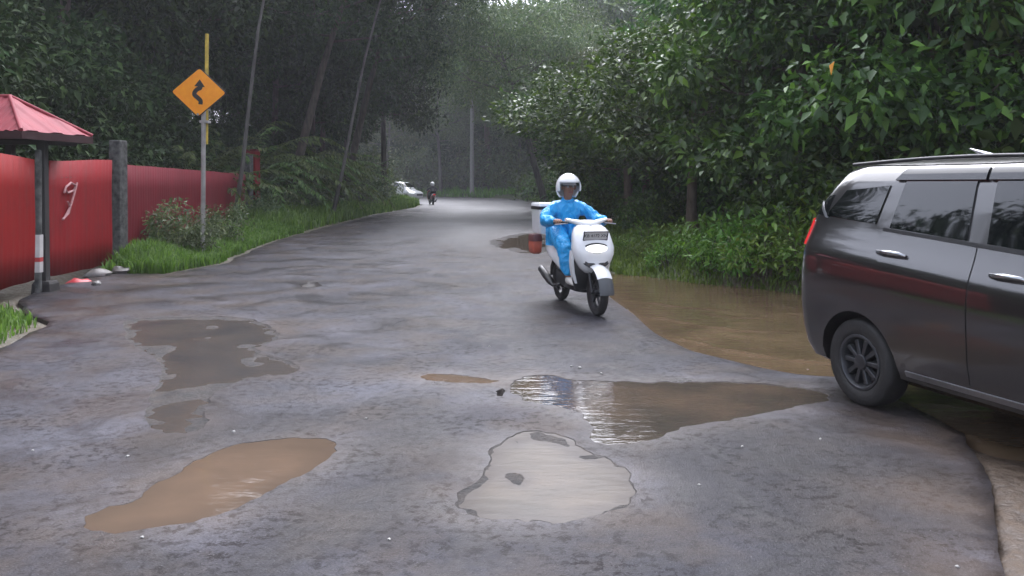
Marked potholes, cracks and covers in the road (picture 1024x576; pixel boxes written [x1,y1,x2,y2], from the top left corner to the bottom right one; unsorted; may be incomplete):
pothole [83,437,337,534]
pothole [421,374,499,383]
pothole [490,233,546,254]
pothole [509,375,830,445]
pothole [122,316,300,433]
pothole [455,430,637,524]
